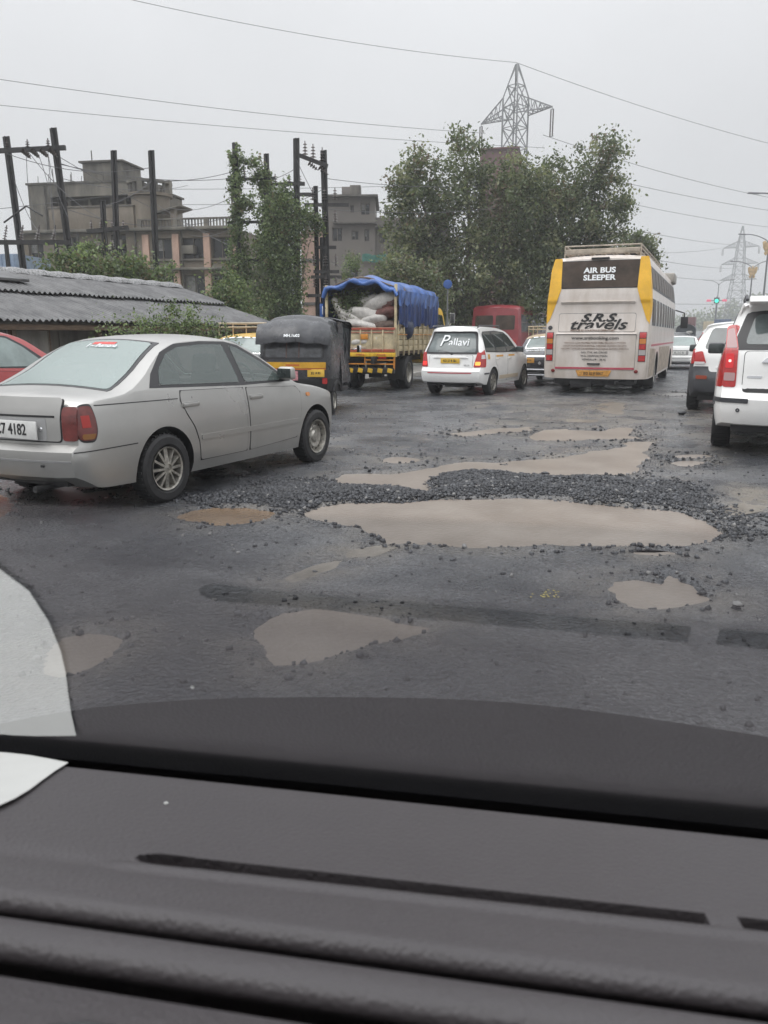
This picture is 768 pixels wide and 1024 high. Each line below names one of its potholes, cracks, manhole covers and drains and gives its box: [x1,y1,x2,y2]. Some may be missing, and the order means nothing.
pothole [529,428,643,441]
pothole [335,442,654,491]
pothole [450,427,532,437]
pothole [177,508,275,526]
pothole [608,576,710,609]
pothole [304,498,722,553]
